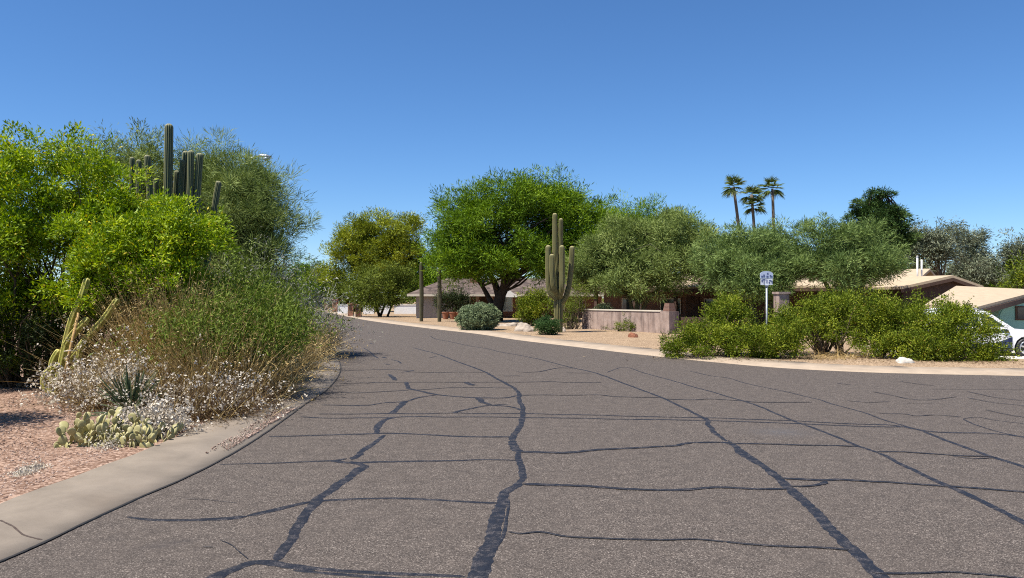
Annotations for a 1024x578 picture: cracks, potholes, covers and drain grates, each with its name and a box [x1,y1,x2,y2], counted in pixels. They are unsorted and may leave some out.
crack [307,368,1024,438]
crack [508,531,849,550]
